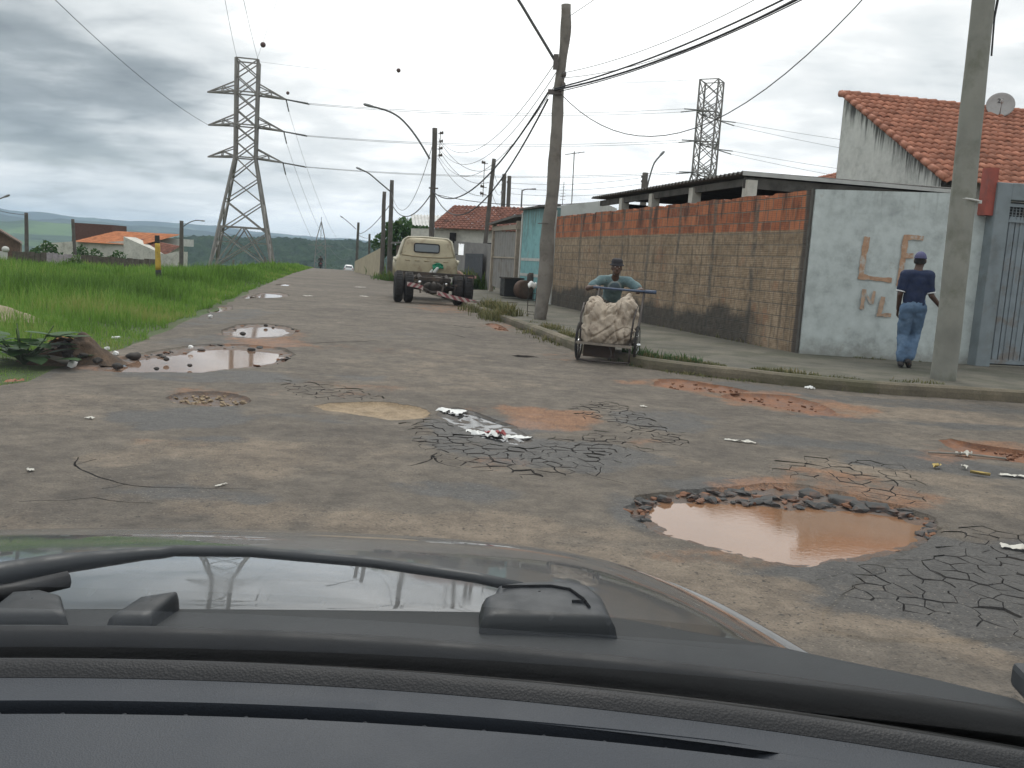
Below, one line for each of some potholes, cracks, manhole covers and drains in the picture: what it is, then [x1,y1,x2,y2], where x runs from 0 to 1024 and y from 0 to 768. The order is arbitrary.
crack [275,379,383,400]
pothole [719,393,838,416]
pothole [221,323,301,339]
pothole [623,483,945,567]
pothole [653,379,749,396]
crack [400,401,688,483]
crack [816,526,1024,639]
crack [772,457,926,504]
pothole [938,438,1024,463]
crack [21,457,257,503]
pothole [165,391,252,407]
pothole [90,344,296,373]
